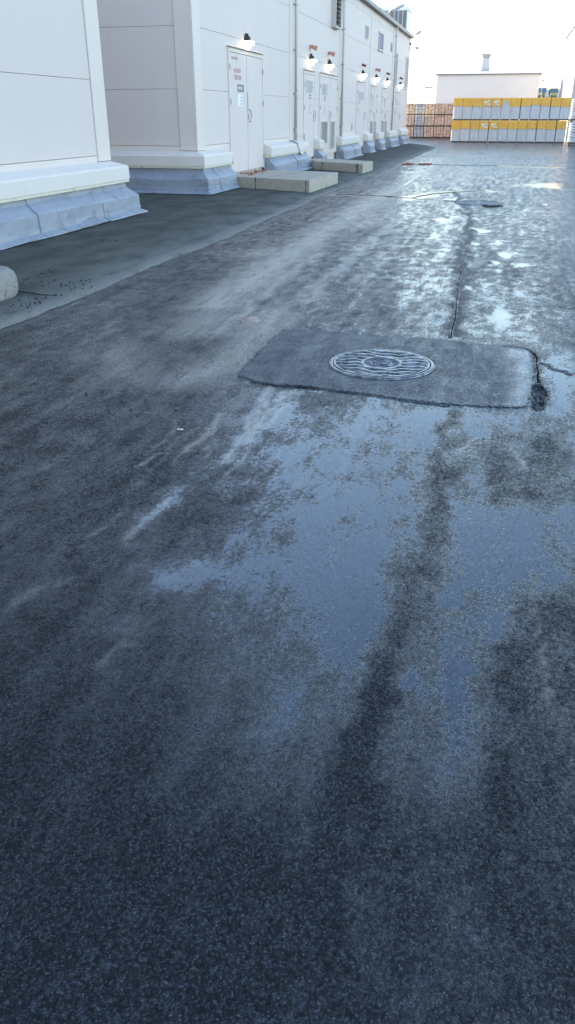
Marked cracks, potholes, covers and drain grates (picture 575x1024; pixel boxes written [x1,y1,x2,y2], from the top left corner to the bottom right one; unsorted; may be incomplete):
crack [508,346,571,383]
pothole [529,383,552,411]
crack [448,250,467,338]
manhole cover [329,349,435,380]
